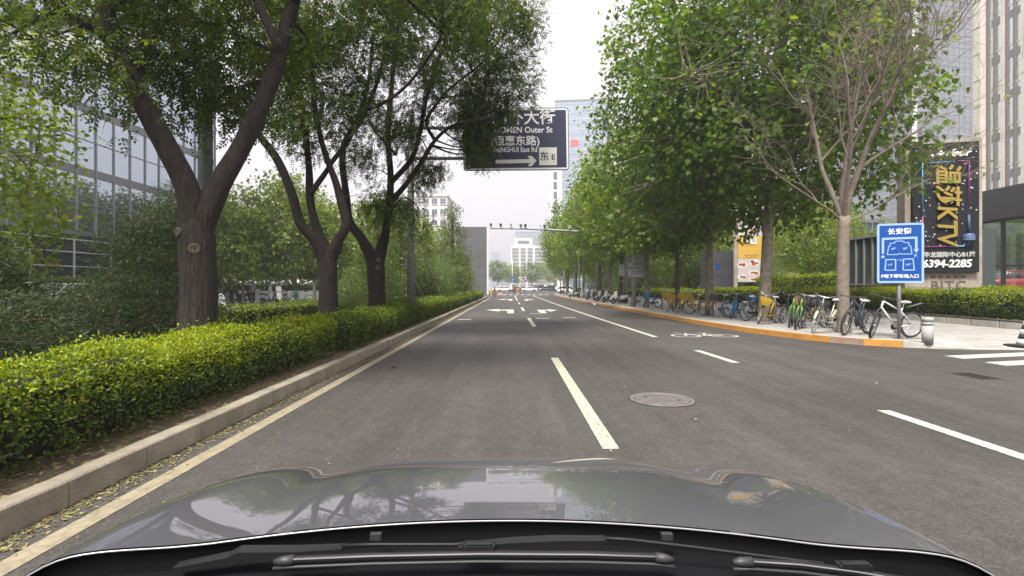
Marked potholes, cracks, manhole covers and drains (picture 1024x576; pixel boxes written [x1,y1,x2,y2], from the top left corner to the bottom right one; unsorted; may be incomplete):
manhole cover [629,392,696,407]
